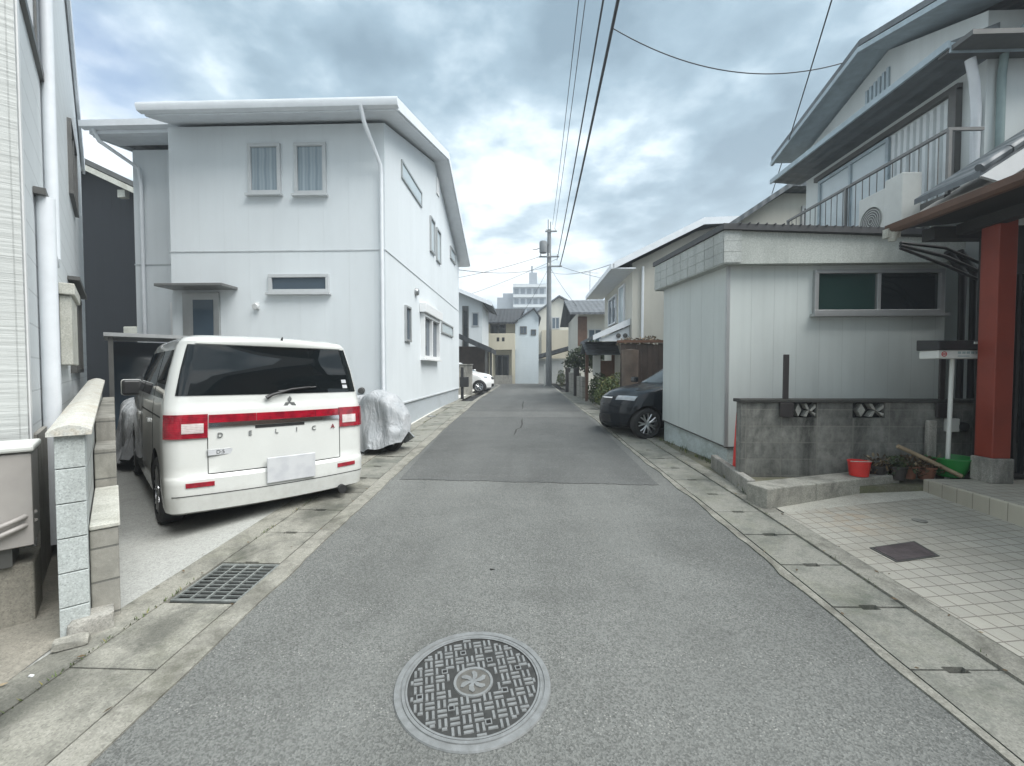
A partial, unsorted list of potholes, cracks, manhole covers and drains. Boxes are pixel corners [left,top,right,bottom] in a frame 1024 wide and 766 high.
drain grate [170,563,280,603]
utility cover [870,541,939,562]
manhole cover [393,632,551,754]
